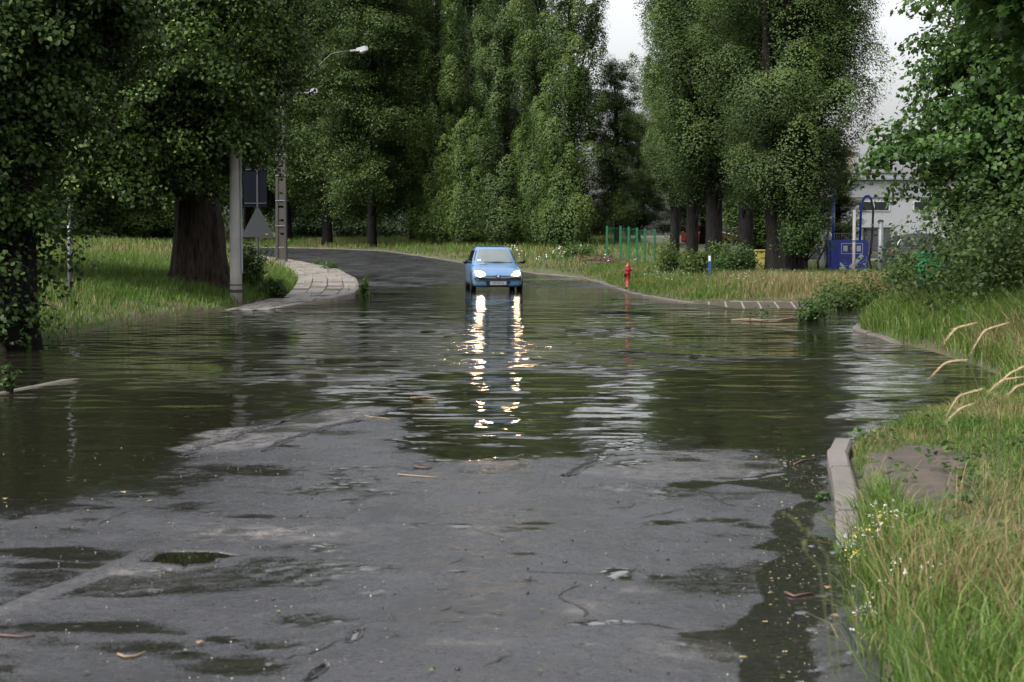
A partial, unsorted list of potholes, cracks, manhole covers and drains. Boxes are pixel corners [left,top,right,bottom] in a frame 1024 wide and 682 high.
pothole [140,549,246,569]
crack [519,570,756,629]
